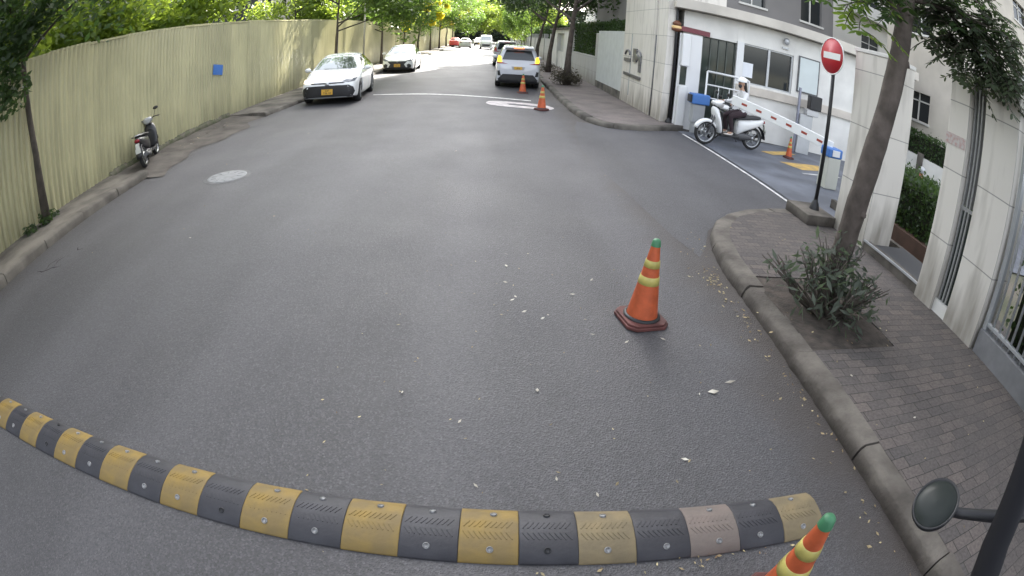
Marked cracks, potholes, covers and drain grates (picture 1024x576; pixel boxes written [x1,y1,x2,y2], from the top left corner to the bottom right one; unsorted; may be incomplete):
manhole cover [203,170,251,185]
